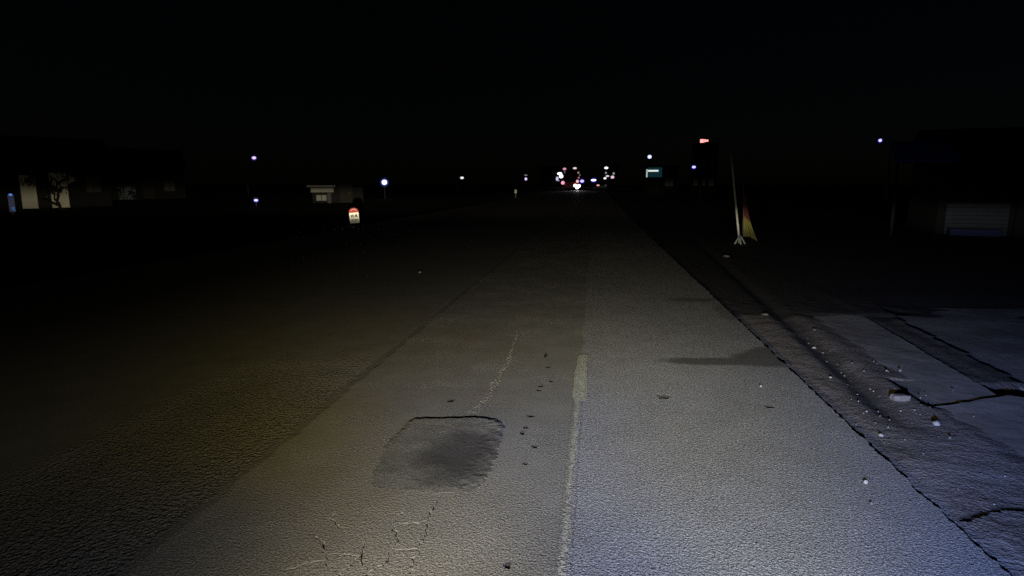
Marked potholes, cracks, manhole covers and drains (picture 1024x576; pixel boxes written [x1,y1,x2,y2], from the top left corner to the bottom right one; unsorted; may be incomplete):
crack [958,506,1024,522]
pothole [370,417,505,494]
crack [283,495,441,576]
crack [468,331,517,415]
